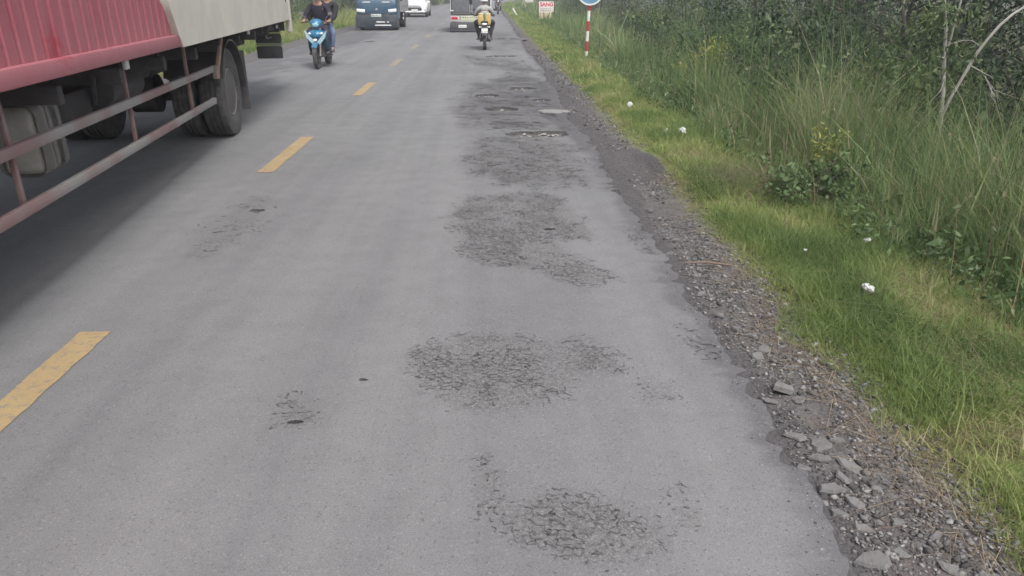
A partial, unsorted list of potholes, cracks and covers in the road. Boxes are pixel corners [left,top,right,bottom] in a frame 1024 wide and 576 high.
crack [472,455,678,572]
crack [440,32,622,288]
crack [676,323,724,360]
pothole [497,130,577,139]
crack [198,196,277,257]
crack [269,390,320,429]
